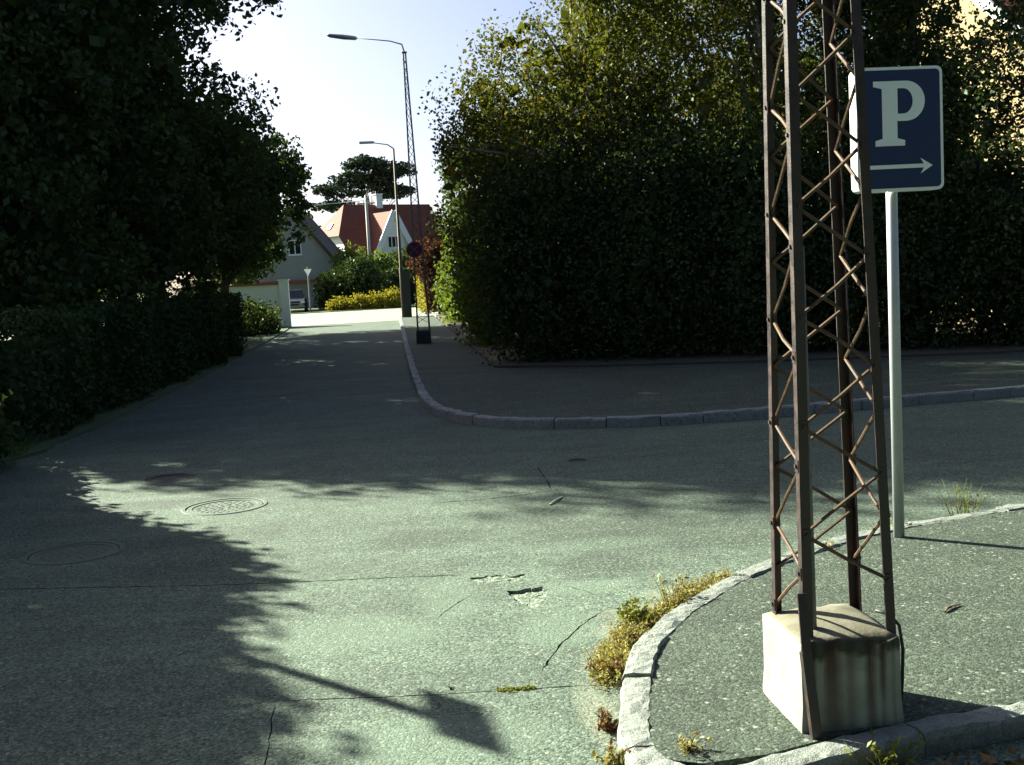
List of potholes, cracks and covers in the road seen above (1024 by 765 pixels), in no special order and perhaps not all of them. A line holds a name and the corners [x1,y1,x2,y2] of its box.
pothole [469,575,505,583]
pothole [507,586,548,608]
manhole cover [22,541,125,566]
crack [539,585,610,674]
manhole cover [181,497,268,516]
